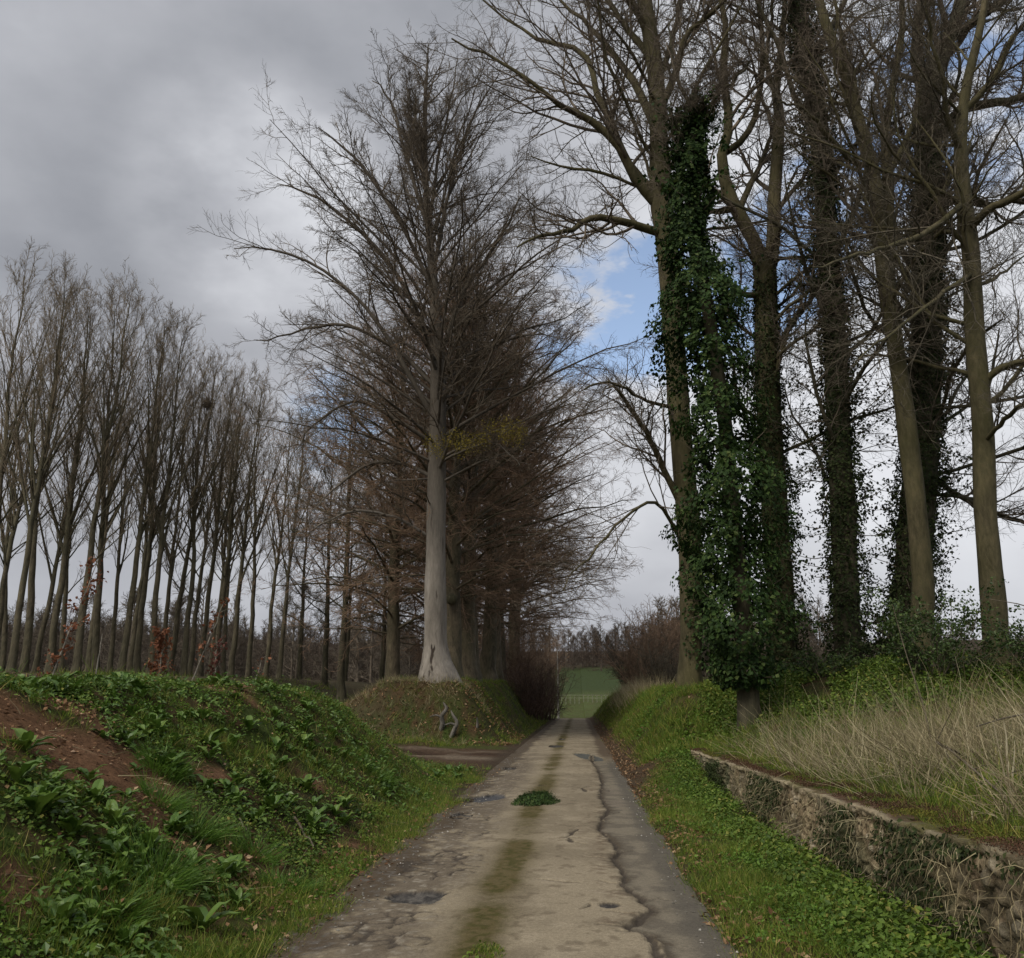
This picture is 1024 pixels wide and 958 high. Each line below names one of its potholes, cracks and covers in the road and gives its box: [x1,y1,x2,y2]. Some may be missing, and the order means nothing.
crack [330,909,442,954]
crack [538,755,670,958]
pothole [573,753,604,761]
pothole [384,889,451,904]
pothole [461,793,509,803]
